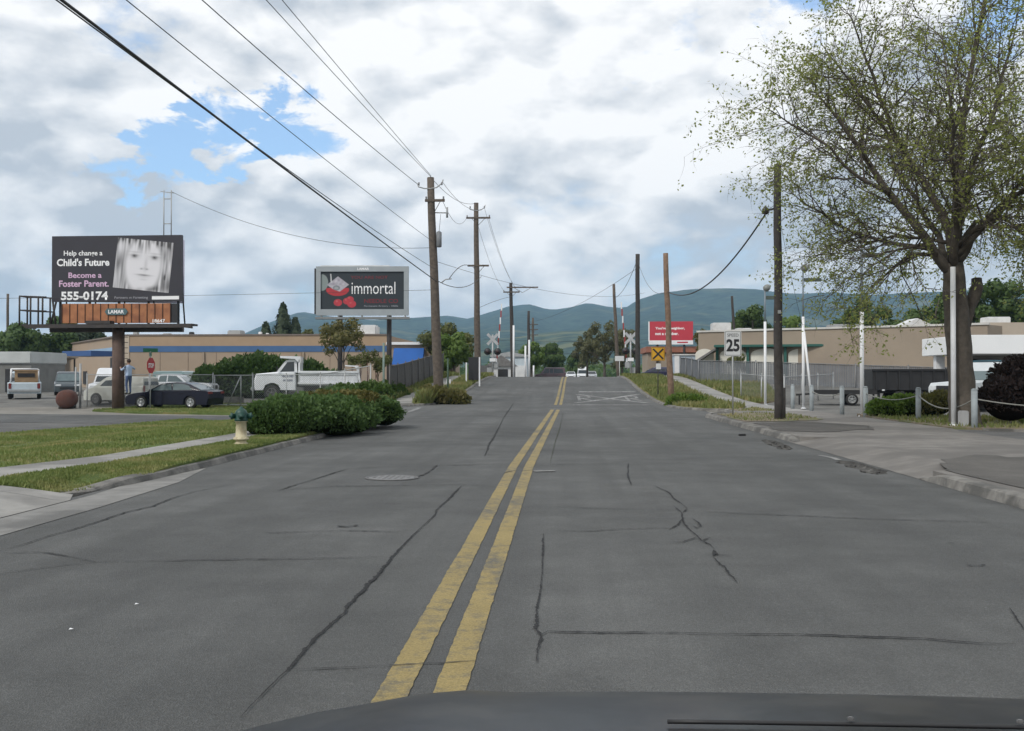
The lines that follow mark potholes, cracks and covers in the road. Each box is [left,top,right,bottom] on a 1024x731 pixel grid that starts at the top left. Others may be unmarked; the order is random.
crack [596,463,631,484]
crack [551,486,1019,581]
crack [0,404,513,715]
crack [533,534,982,661]
